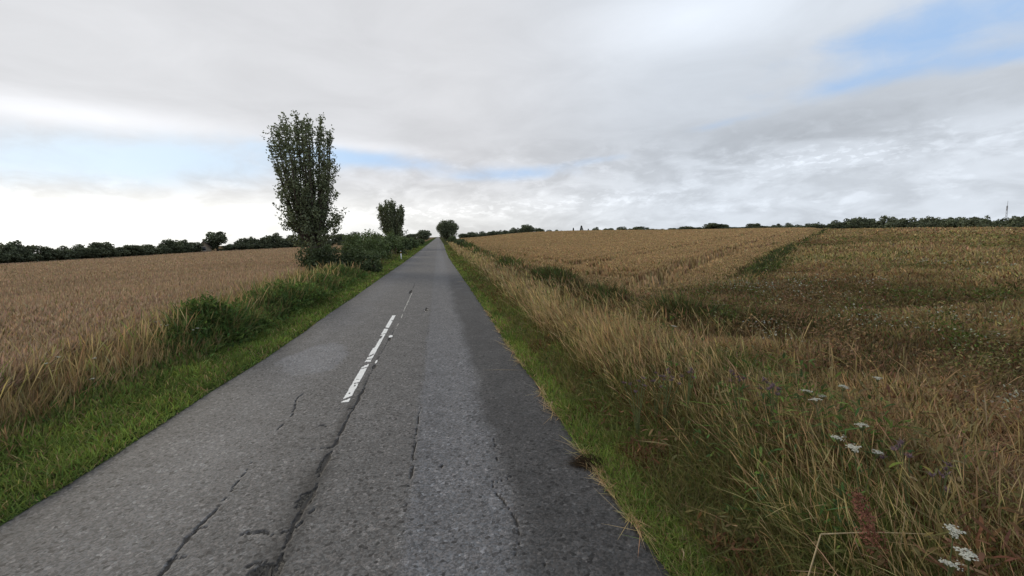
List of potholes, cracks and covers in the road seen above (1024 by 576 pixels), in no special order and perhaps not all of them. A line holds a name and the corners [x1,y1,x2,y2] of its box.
crack [410,412,420,479]
crack [492,440,520,556]
crack [160,474,245,576]
